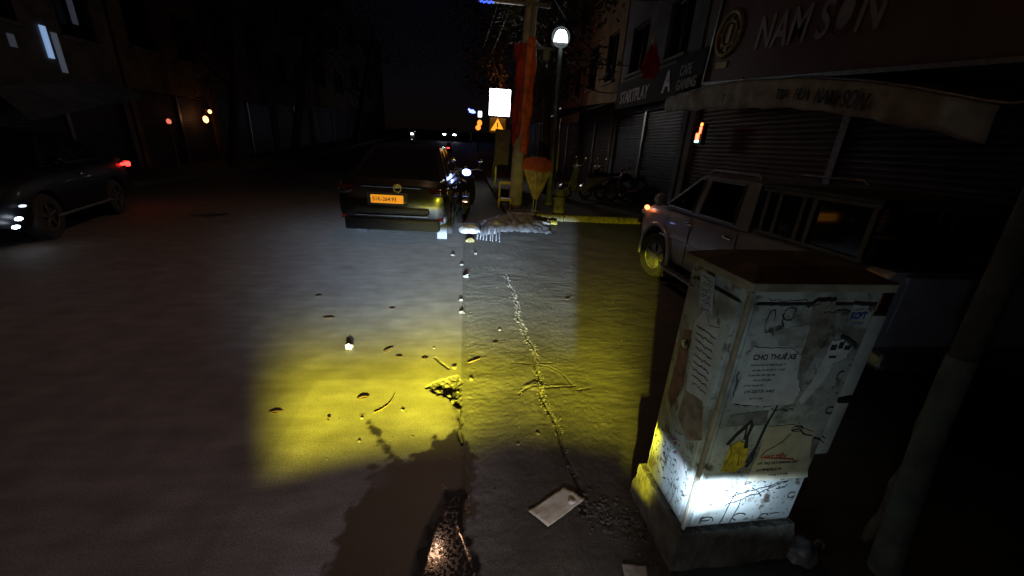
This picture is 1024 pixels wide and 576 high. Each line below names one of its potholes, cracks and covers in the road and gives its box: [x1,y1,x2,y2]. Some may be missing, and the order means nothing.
pothole [426,376,462,409]
crack [518,363,587,395]
